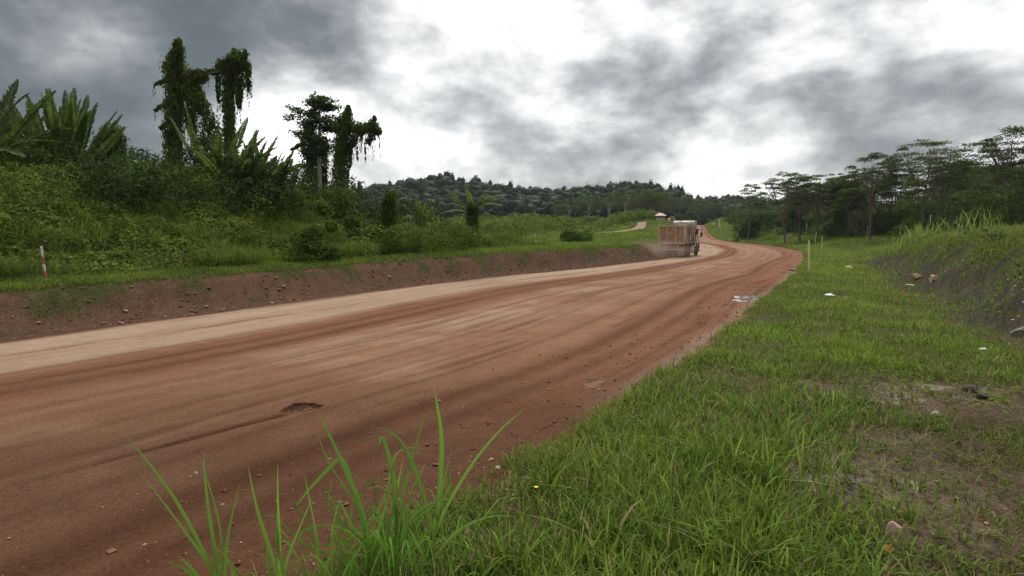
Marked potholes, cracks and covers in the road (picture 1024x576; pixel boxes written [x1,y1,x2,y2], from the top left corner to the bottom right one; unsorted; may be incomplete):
pothole [278,402,328,414]
